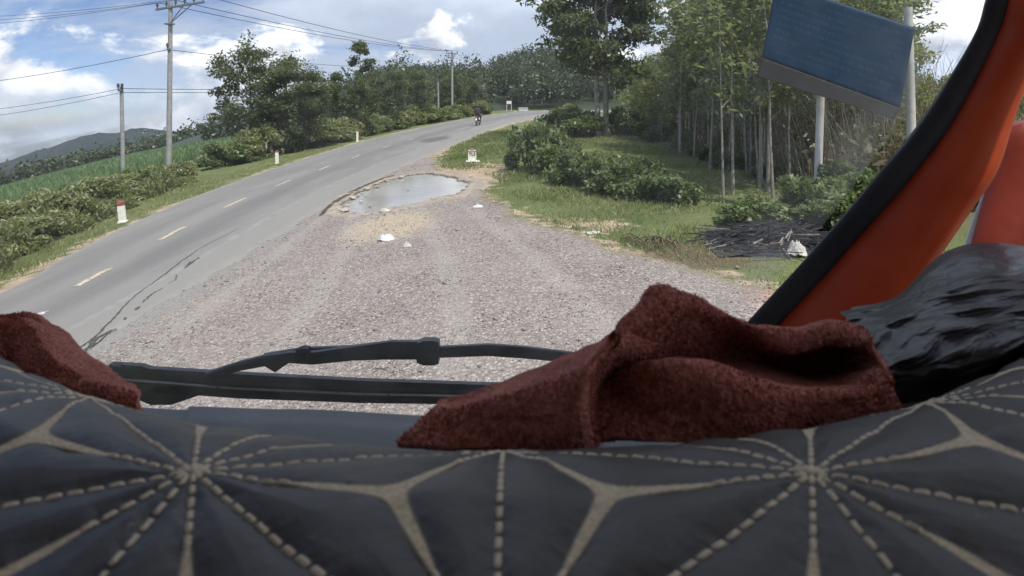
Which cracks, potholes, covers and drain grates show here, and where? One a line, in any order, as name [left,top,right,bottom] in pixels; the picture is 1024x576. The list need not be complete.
crack [81,233,229,352]
pothole [319,171,489,217]
